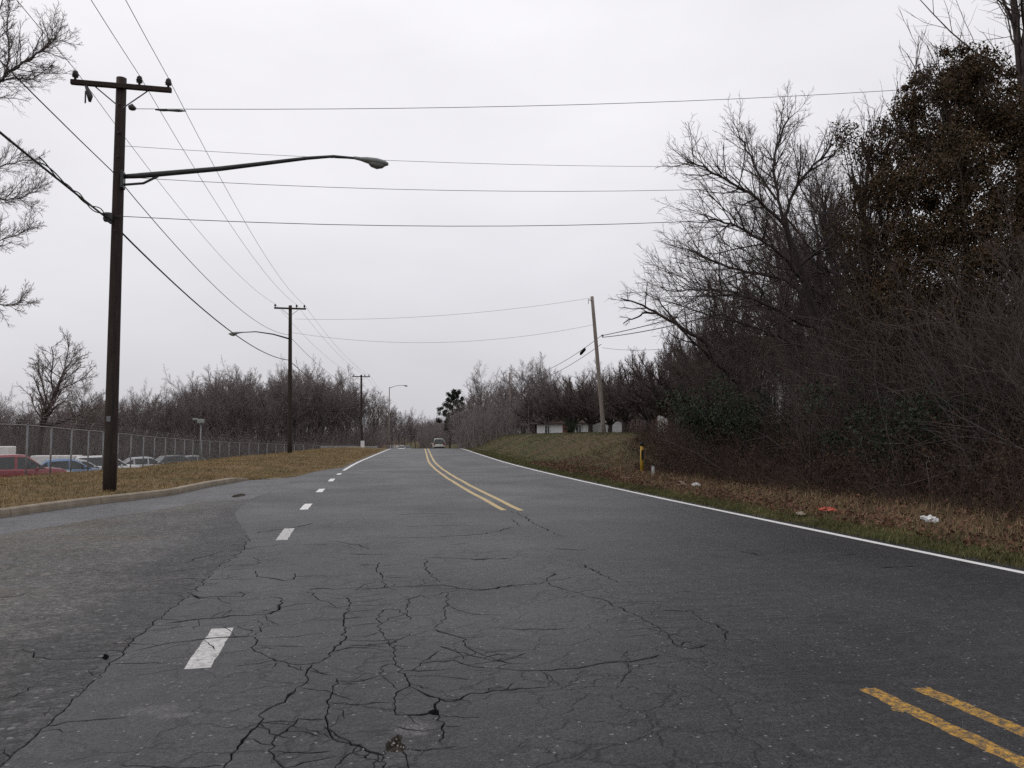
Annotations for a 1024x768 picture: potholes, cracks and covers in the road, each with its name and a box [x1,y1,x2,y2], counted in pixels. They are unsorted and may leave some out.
pothole [385,734,406,753]
crack [0,513,763,768]
